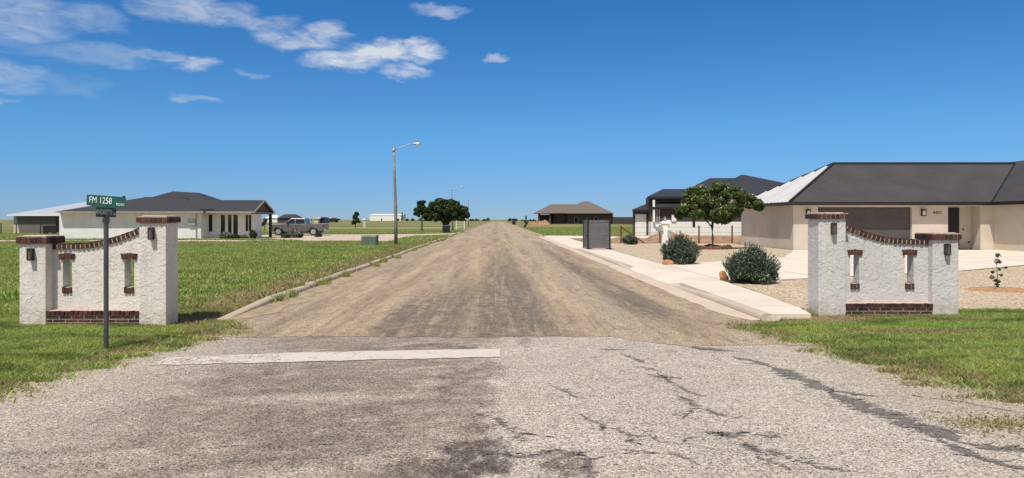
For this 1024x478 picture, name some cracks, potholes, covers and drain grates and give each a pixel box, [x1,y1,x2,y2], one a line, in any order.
crack [550,346,1024,474]
